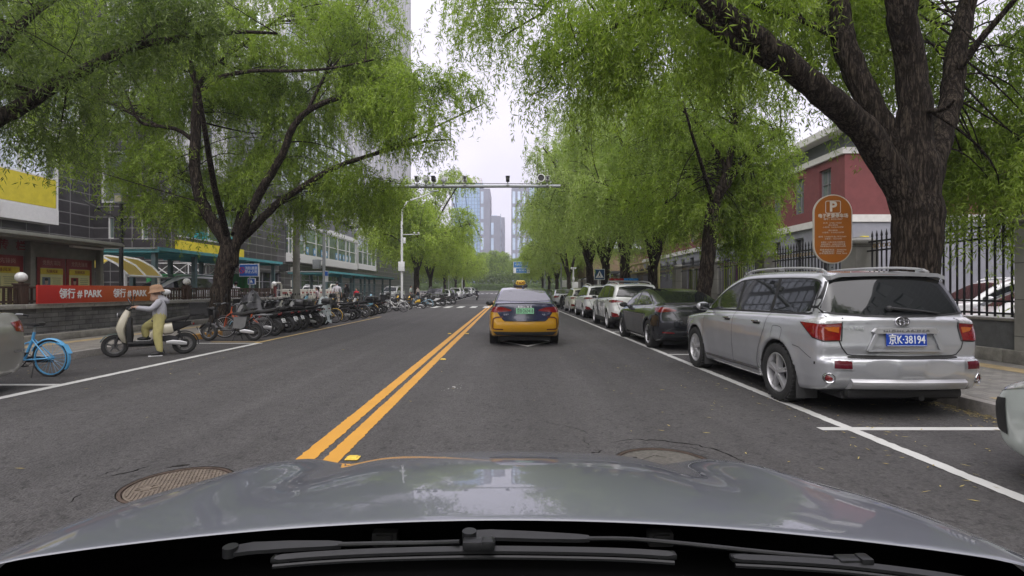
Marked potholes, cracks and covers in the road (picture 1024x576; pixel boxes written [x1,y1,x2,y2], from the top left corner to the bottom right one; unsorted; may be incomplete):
manhole cover [618,448,706,464]
crack [69,466,148,503]
manhole cover [116,467,232,504]
